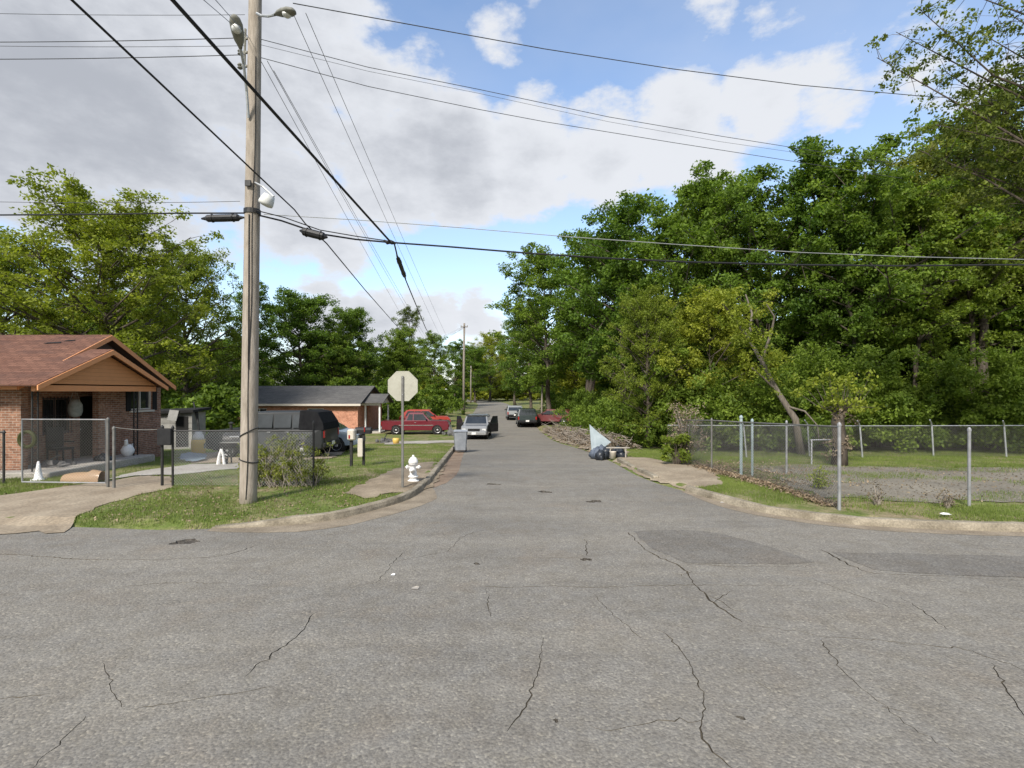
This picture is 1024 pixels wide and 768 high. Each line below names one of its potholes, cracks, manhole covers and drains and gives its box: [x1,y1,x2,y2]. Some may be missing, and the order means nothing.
crack [588,533,1024,768]
crack [134,614,313,710]
crack [507,638,544,731]
